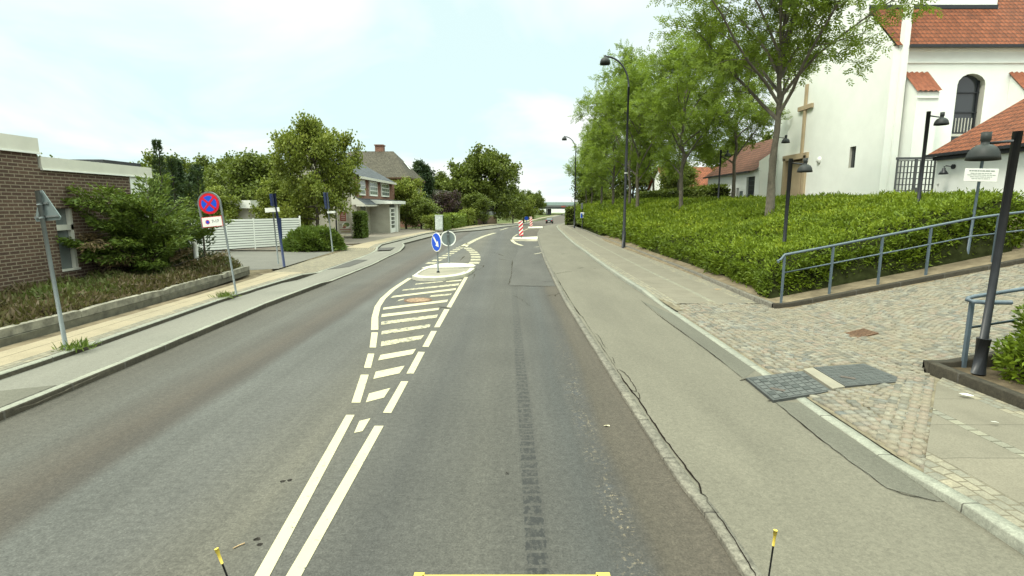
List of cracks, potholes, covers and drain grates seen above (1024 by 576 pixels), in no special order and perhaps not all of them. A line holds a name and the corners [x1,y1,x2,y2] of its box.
manhole cover [813,363,906,388]
crack [543,267,756,576]
crack [768,400,935,501]
